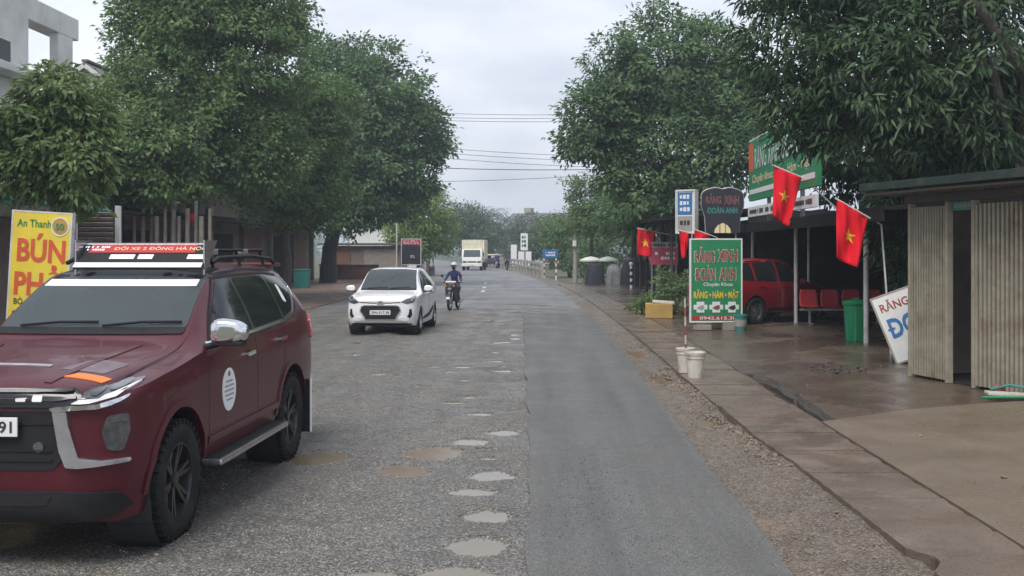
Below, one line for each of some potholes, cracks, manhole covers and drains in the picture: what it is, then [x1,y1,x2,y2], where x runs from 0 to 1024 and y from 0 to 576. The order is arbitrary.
pothole [367,462,434,479]
pothole [397,445,468,461]
pothole [435,533,516,557]
pothole [479,428,526,436]
pothole [441,486,501,497]
pothole [465,468,523,482]
pothole [441,436,494,446]
pothole [282,449,353,467]
pothole [456,506,515,523]
